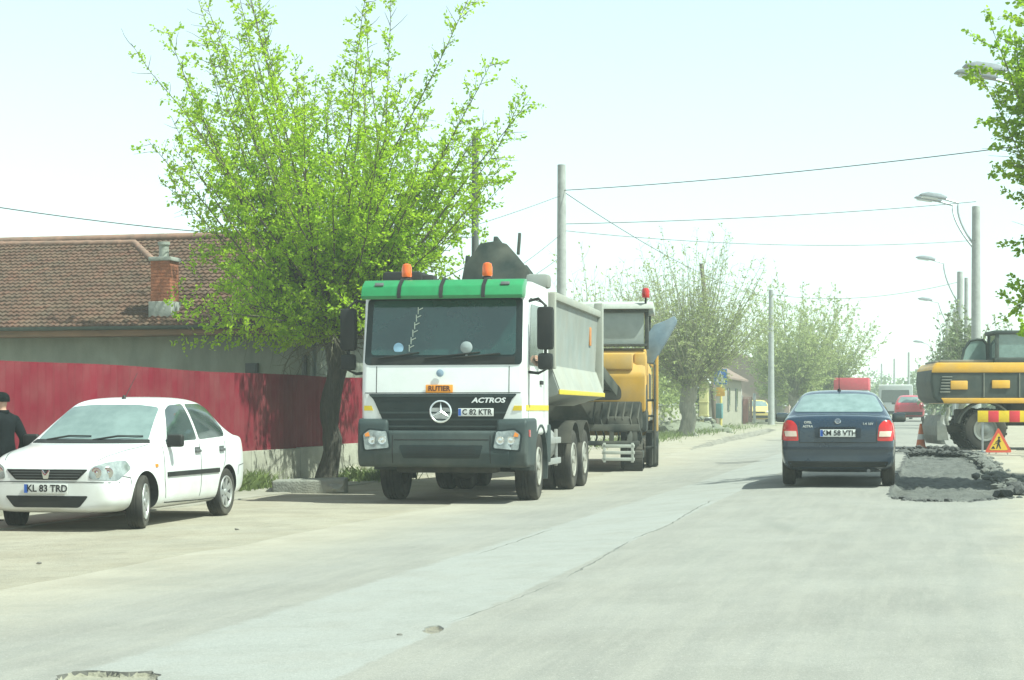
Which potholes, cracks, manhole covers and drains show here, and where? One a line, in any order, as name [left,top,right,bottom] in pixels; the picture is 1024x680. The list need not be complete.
pothole [56,670,161,680]
pothole [886,449,1014,501]
pothole [422,625,444,634]
